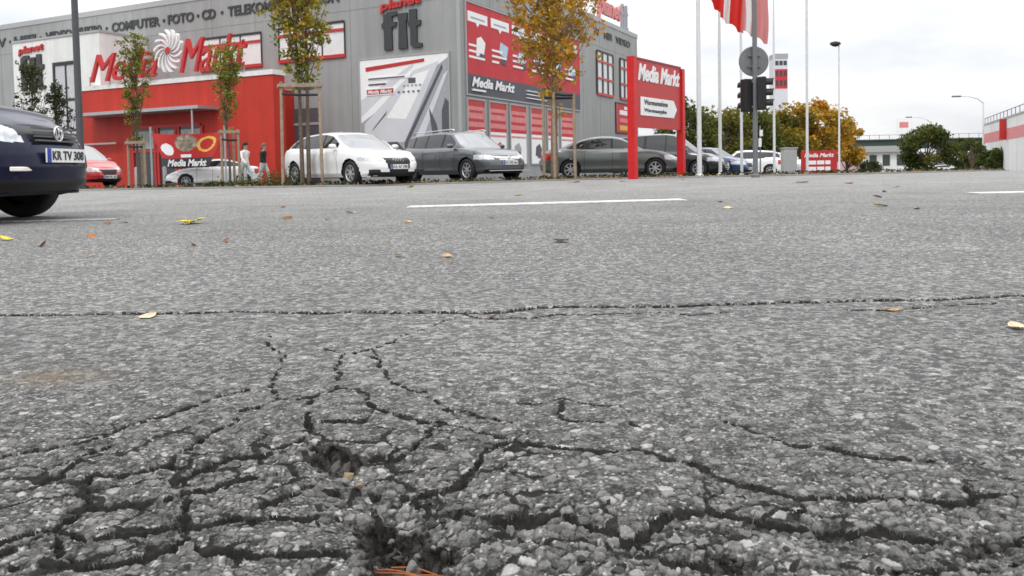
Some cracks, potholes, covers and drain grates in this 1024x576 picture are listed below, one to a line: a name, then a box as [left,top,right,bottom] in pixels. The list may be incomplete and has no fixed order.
crack [0,317,1019,576]
pothole [308,442,369,478]
pothole [350,524,466,576]
